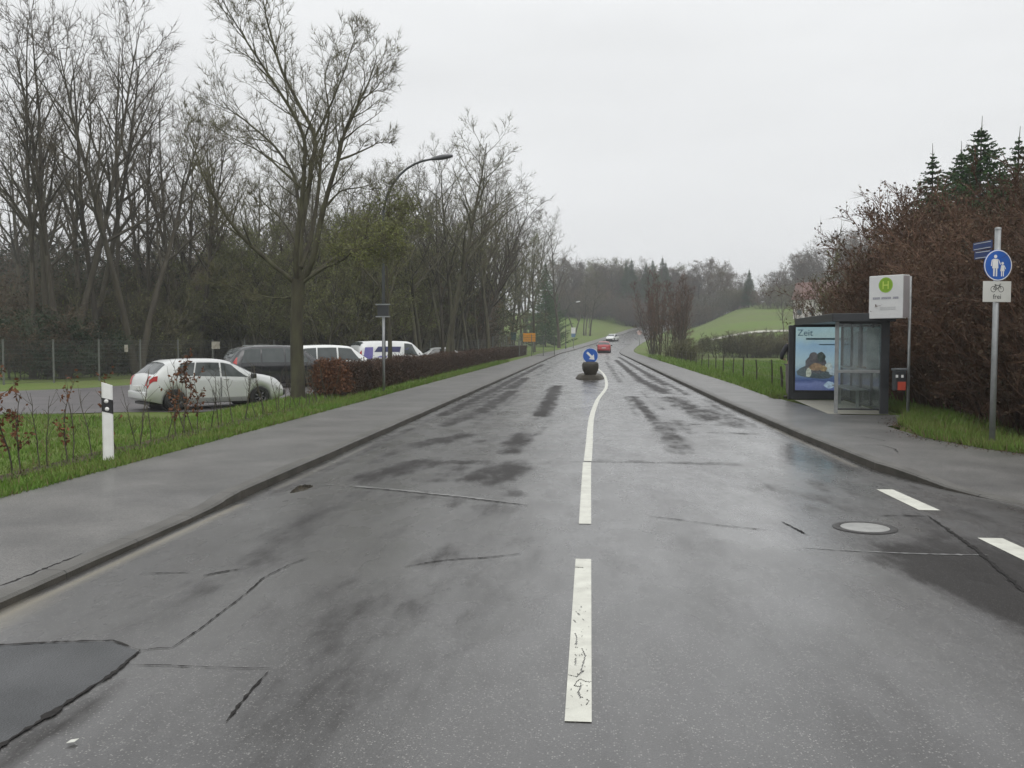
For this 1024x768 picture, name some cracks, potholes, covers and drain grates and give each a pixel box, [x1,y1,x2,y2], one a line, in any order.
crack [0,557,308,748]
manhole cover [832,521,898,534]
crack [405,553,519,567]
pothole [290,484,313,493]
